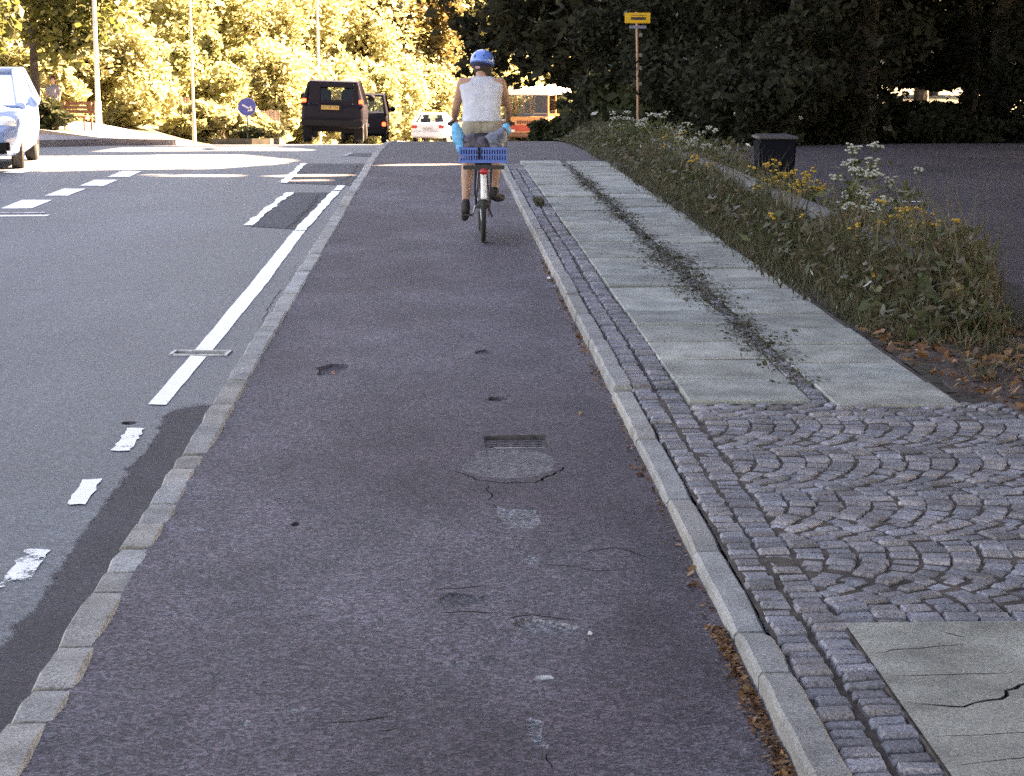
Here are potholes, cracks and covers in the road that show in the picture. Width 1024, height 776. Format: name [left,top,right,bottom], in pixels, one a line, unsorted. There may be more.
crack [881,630,968,653]
crack [442,611,576,621]
crack [455,468,563,501]
crack [330,716,401,731]
pothole [315,364,349,376]
crack [902,673,1024,708]
pothole [434,593,491,608]
crack [557,547,649,572]
